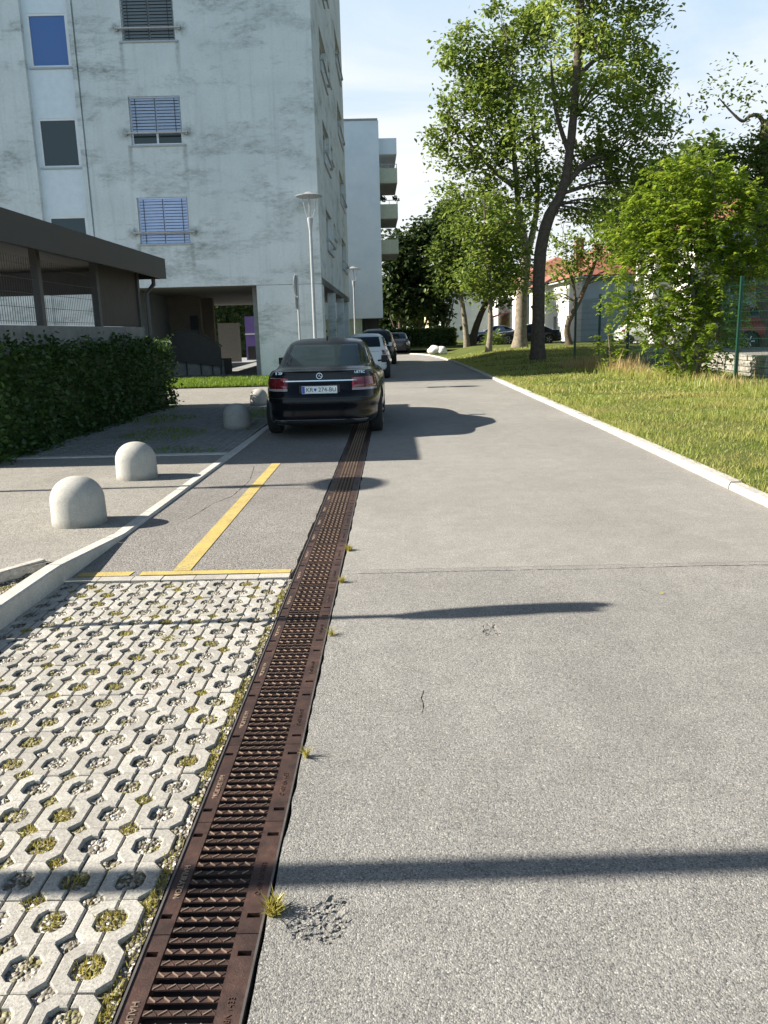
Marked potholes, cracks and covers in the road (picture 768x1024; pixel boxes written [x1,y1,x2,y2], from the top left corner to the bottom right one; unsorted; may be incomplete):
pothole [283,895,351,945]
drain grate [292,562,341,590]
drain grate [336,467,363,475]
drain grate [228,688,313,747]
drain grate [281,584,337,613]
drain grate [197,744,301,830]
drain grate [116,934,259,1024]
drain grate [152,821,284,938]
drain grate [308,527,349,545]
drain grate [300,543,346,563]
drain grate [250,645,323,694]
drain grate [320,502,355,515]
